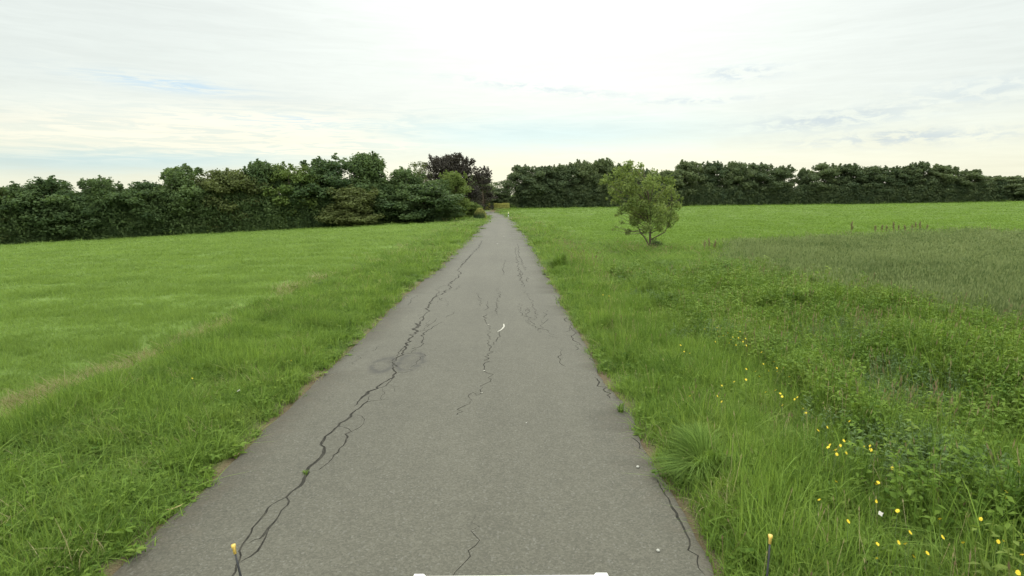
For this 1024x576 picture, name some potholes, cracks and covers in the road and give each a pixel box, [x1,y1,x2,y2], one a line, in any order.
crack [232,241,482,576]
crack [502,247,611,398]
crack [456,289,501,415]
crack [657,480,705,575]
